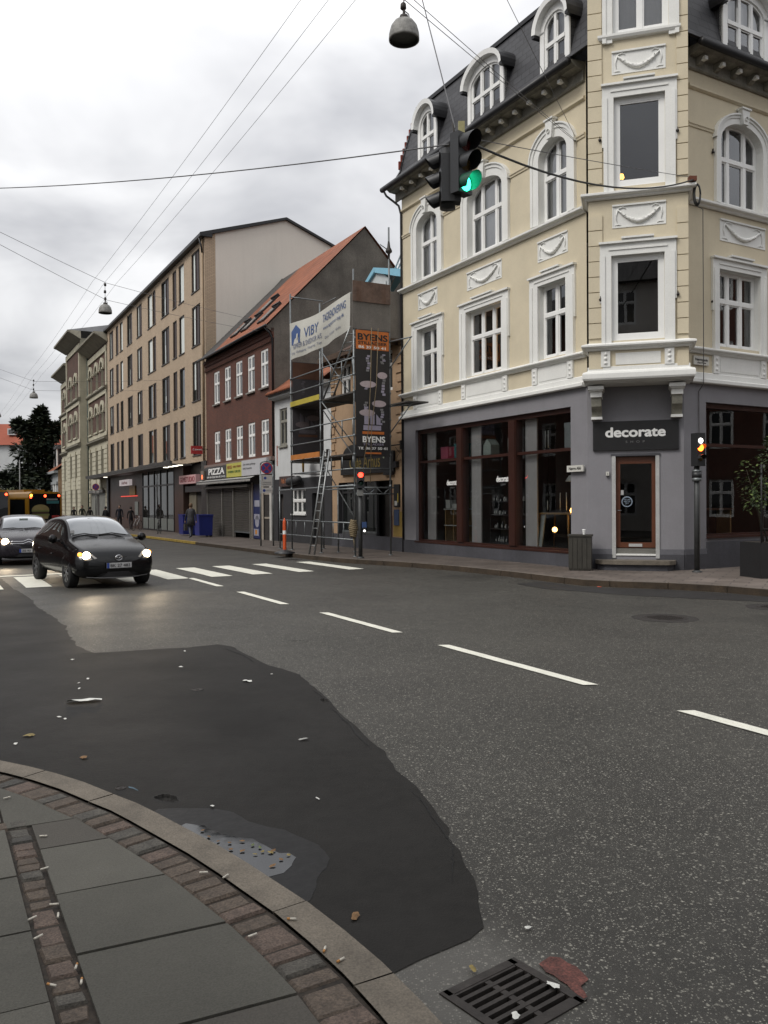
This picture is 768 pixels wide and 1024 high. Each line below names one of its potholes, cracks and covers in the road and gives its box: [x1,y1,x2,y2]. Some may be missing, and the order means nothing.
drain grate [439,957,587,1024]
manhole cover [632,614,699,622]
